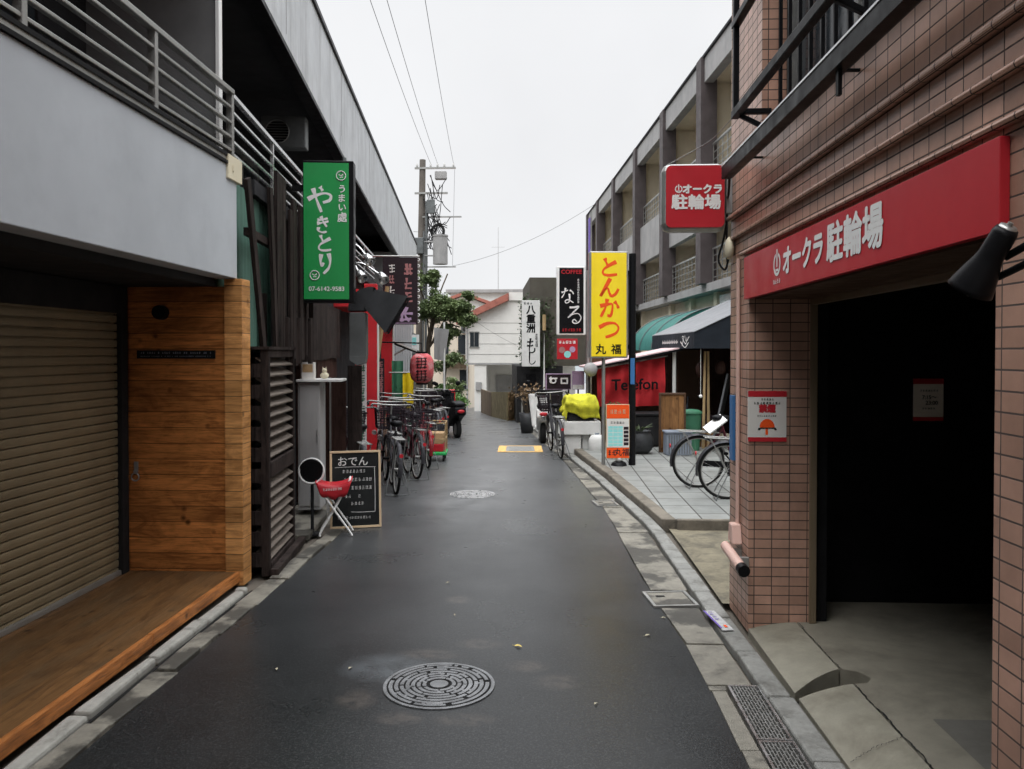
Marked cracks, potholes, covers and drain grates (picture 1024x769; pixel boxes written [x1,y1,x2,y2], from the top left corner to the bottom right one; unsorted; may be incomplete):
drain grate [757,740,812,769]
drain grate [727,685,794,745]
manhole cover [450,490,495,499]
manhole cover [383,662,495,710]
crack [853,685,934,769]
